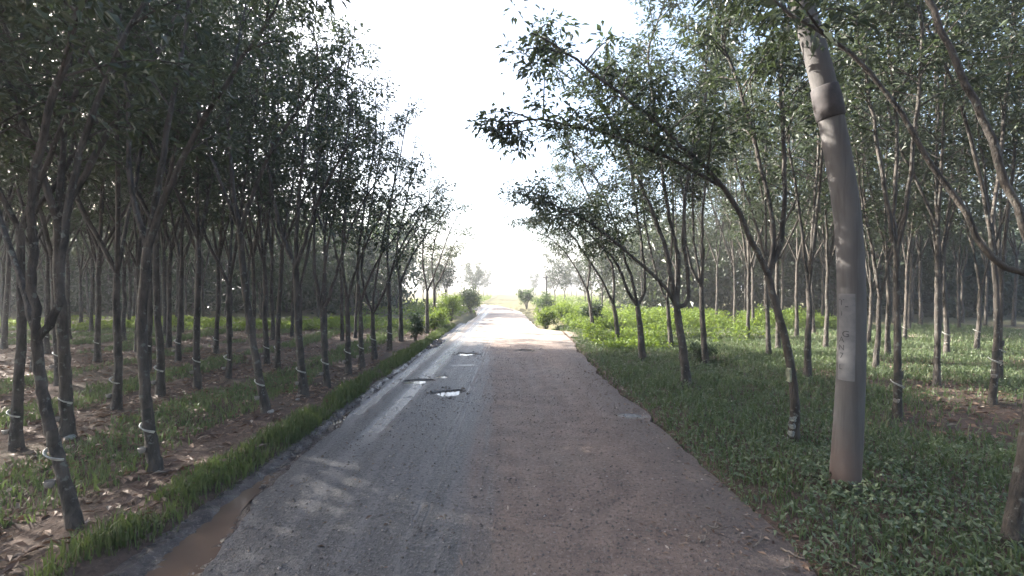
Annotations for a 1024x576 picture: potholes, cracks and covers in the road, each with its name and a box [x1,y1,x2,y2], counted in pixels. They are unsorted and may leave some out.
pothole [426,386,470,399]
pothole [392,376,442,386]
